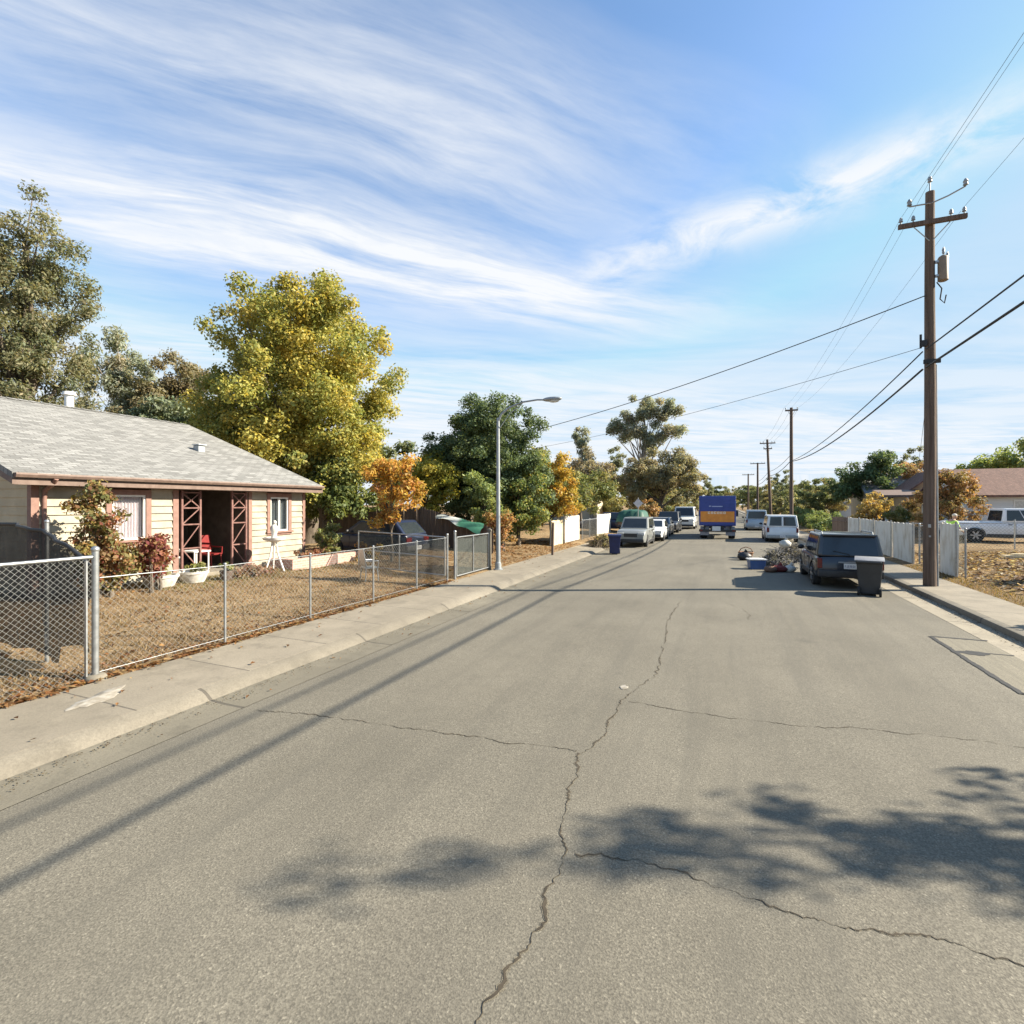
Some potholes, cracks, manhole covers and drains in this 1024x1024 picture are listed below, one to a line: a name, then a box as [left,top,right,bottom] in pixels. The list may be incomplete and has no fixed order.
crack [259,604,1024,1024]
